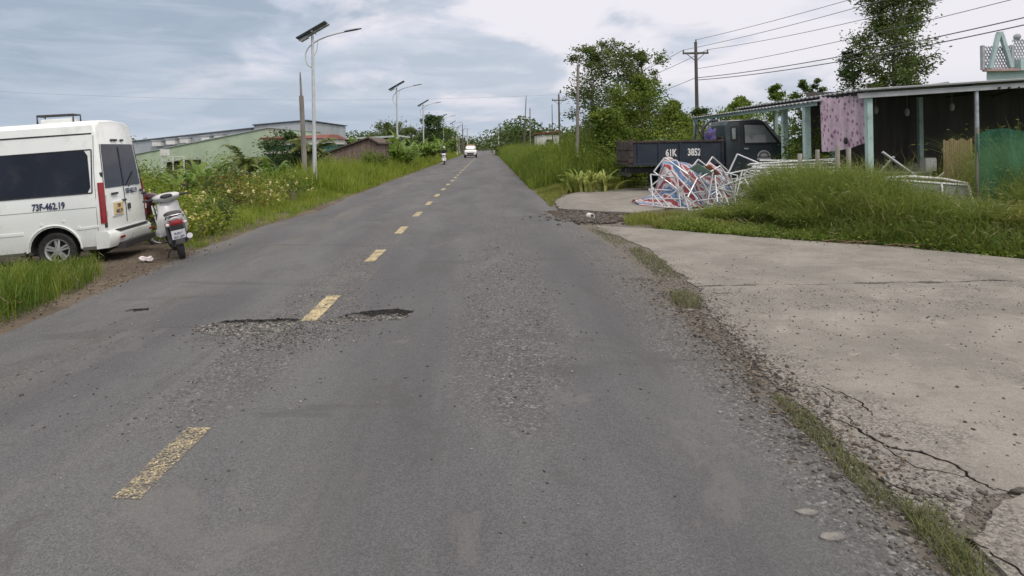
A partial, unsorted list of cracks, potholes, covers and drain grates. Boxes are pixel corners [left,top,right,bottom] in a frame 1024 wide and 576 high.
pothole [192,317,300,336]
crack [805,385,1020,500]
crack [965,538,1024,576]
pothole [321,308,414,324]
